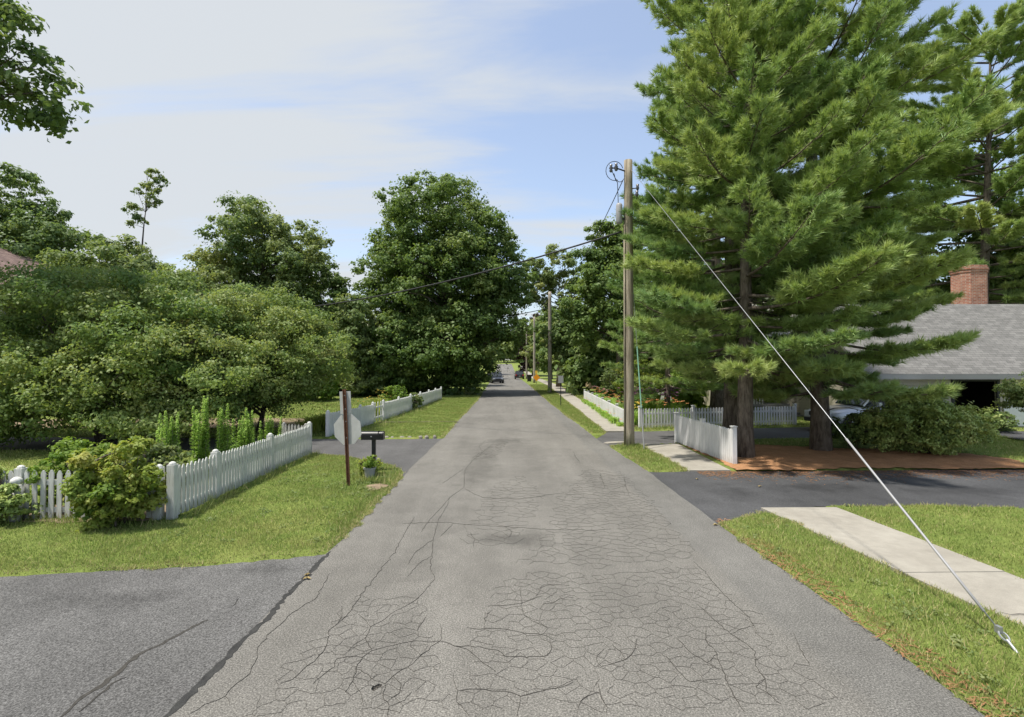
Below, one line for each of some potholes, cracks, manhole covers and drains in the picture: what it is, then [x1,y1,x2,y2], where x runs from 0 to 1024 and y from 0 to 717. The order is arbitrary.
crack [243,441,843,717]
crack [60,573,330,717]
